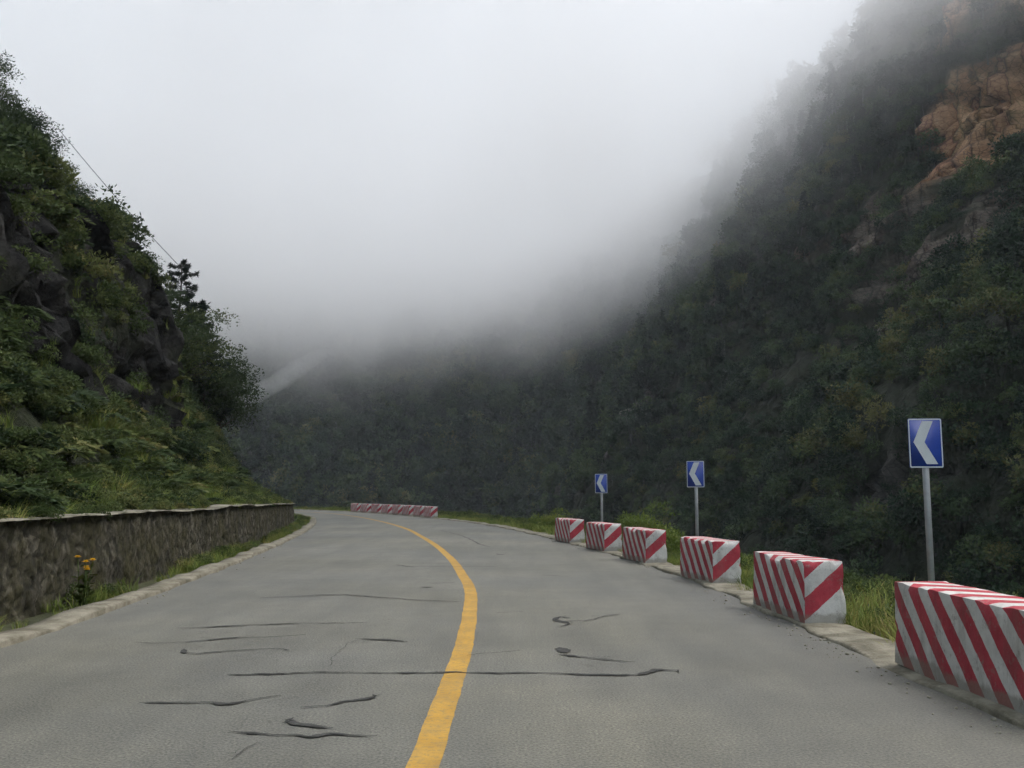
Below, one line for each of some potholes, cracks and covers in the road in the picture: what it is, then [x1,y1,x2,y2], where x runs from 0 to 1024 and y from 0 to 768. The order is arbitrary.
crack [227,694,380,758]
crack [552,614,618,626]
crack [139,695,280,705]
crack [141,622,679,676]
